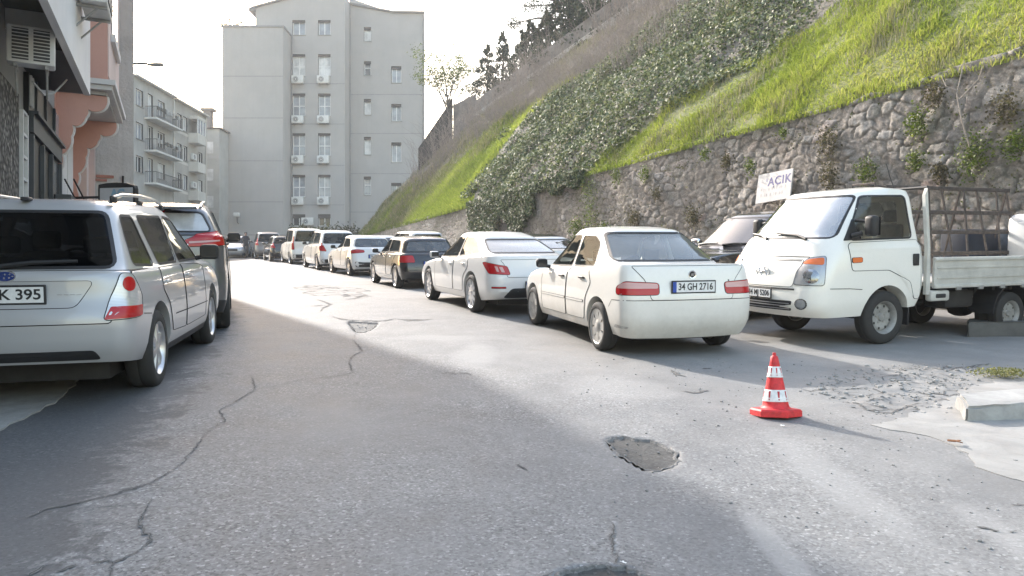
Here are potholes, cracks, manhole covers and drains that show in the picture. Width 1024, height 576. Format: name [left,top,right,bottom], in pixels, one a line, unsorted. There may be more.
pothole [605,435,682,472]
pothole [348,321,378,333]
crack [594,524,619,562]
crack [301,285,428,322]
crack [26,333,363,576]
pothole [554,563,651,576]
